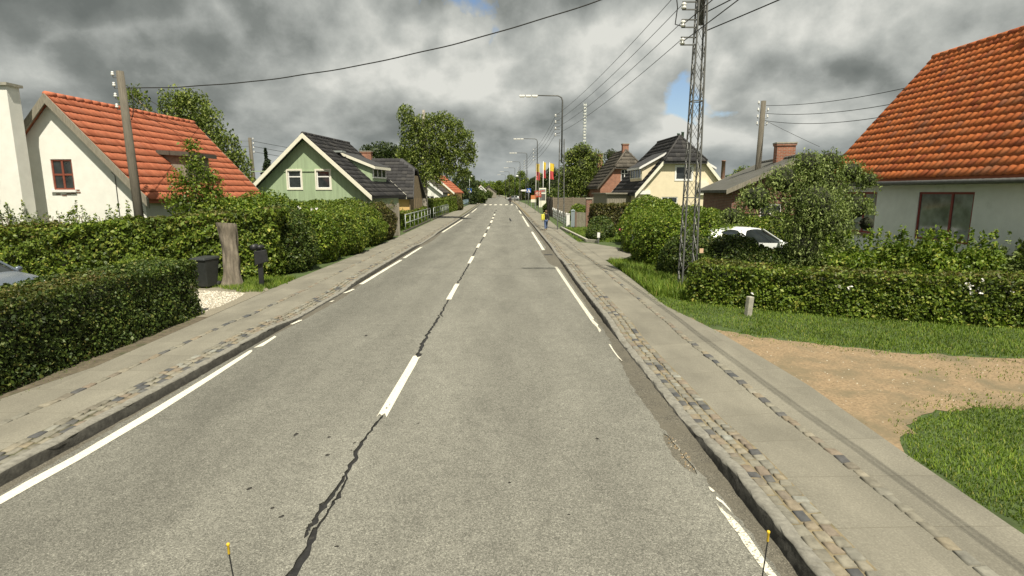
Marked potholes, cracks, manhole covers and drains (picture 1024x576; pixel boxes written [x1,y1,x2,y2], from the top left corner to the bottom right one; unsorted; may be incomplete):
crack [286,210,497,576]
